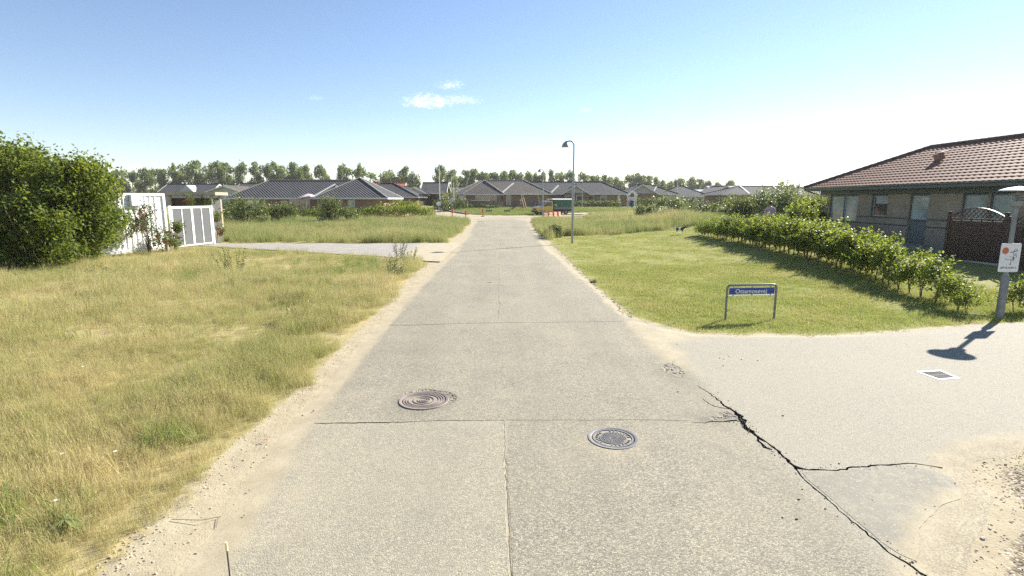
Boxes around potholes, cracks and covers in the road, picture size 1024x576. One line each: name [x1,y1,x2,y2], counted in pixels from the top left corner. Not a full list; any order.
manhole cover [588,427,639,450]
drain grate [915,370,959,380]
pothole [661,363,686,377]
crack [695,385,943,576]
manhole cover [399,391,449,410]
